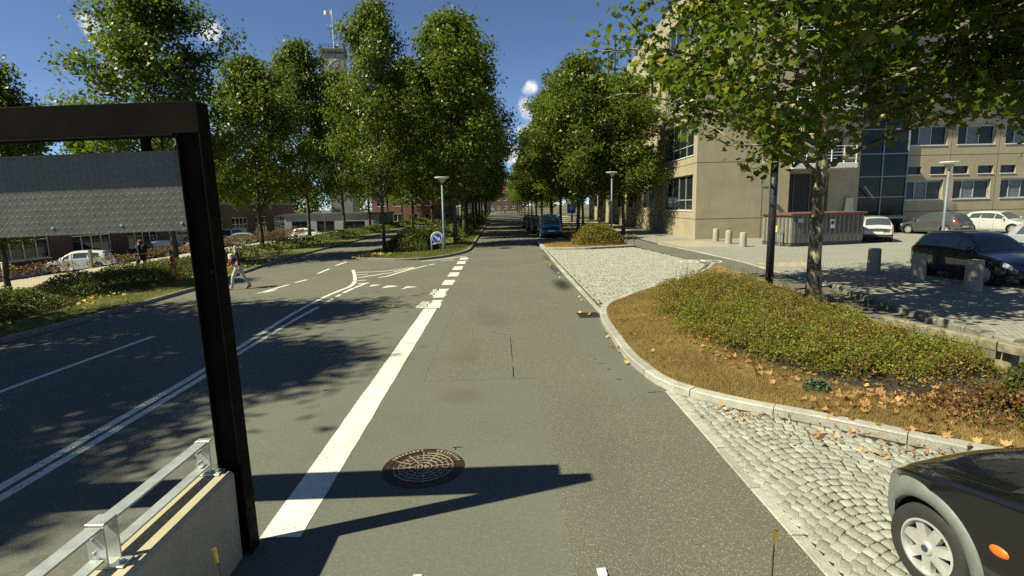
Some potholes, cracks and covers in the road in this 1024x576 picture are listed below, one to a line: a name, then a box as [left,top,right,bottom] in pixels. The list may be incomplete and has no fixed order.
manhole cover [382,449,464,488]
